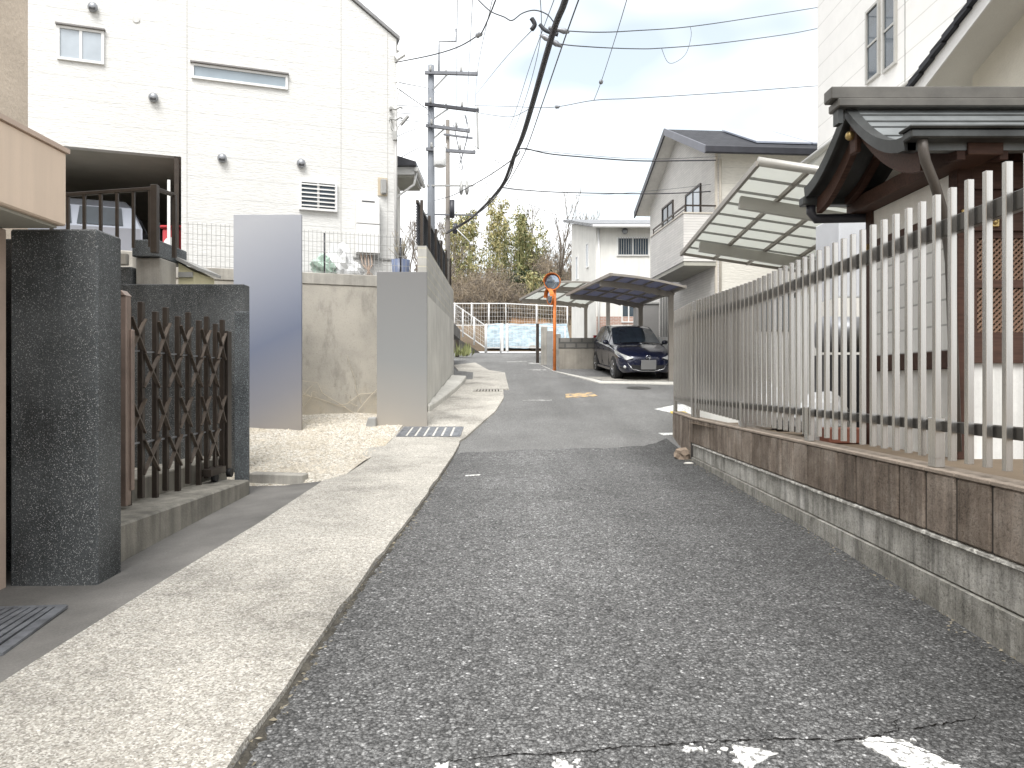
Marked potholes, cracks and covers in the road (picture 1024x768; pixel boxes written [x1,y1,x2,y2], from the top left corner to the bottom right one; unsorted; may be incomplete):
drain grate [0,604,68,656]
drain grate [396,426,464,437]
crack [446,715,977,761]
